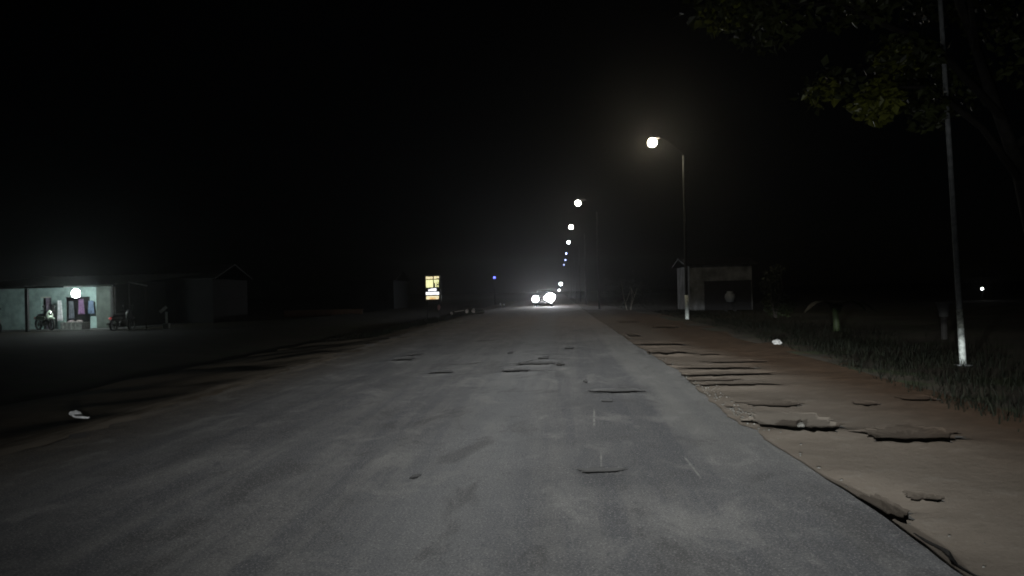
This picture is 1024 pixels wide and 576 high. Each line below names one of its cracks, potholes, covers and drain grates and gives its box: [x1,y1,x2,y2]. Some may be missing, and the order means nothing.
pothole [849,424,970,443]
pothole [903,490,945,503]
pothole [739,410,846,433]
